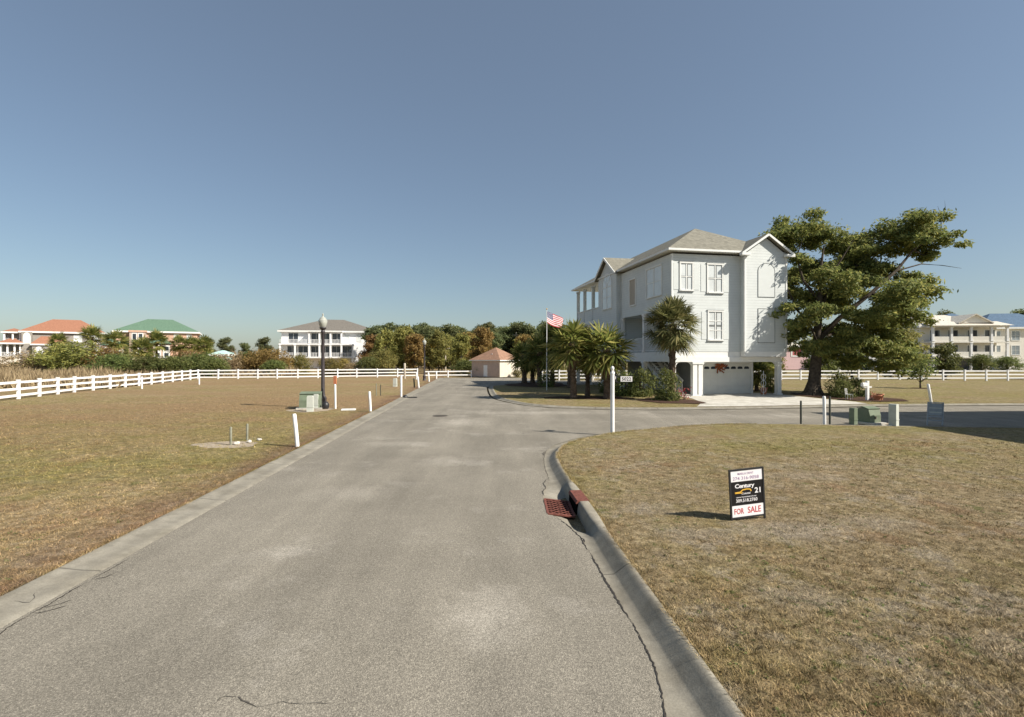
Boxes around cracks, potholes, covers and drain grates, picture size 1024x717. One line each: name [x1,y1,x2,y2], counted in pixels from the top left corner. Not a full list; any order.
crack [557,517,666,717]
crack [0,562,122,634]
drain grate [544,490,589,518]
crack [205,696,328,712]
